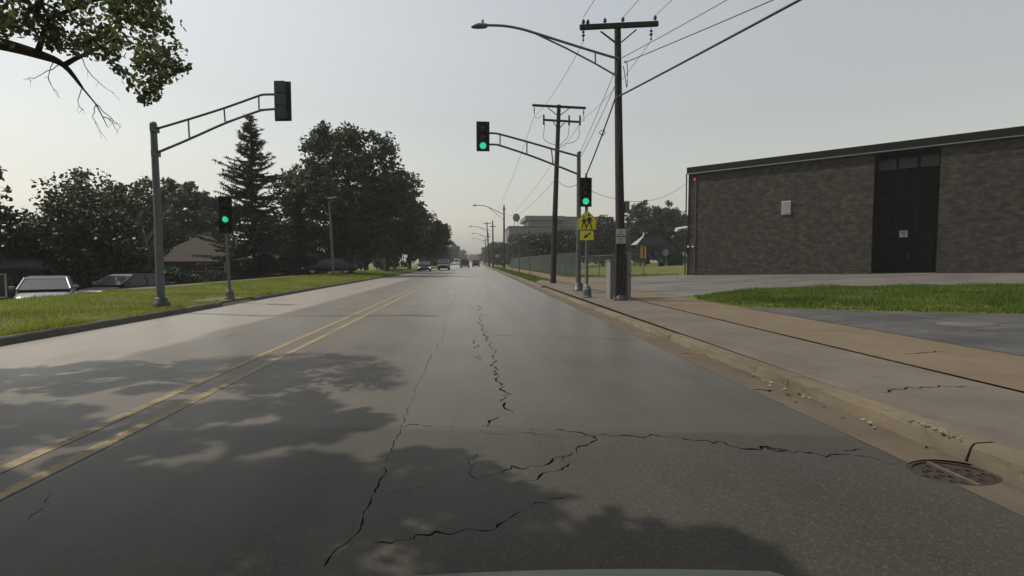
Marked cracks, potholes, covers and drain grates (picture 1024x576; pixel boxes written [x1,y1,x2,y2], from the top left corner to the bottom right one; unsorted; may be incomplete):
crack [376,497,563,544]
crack [473,306,630,427]
drain grate [907,461,1002,499]
crack [404,424,899,483]
